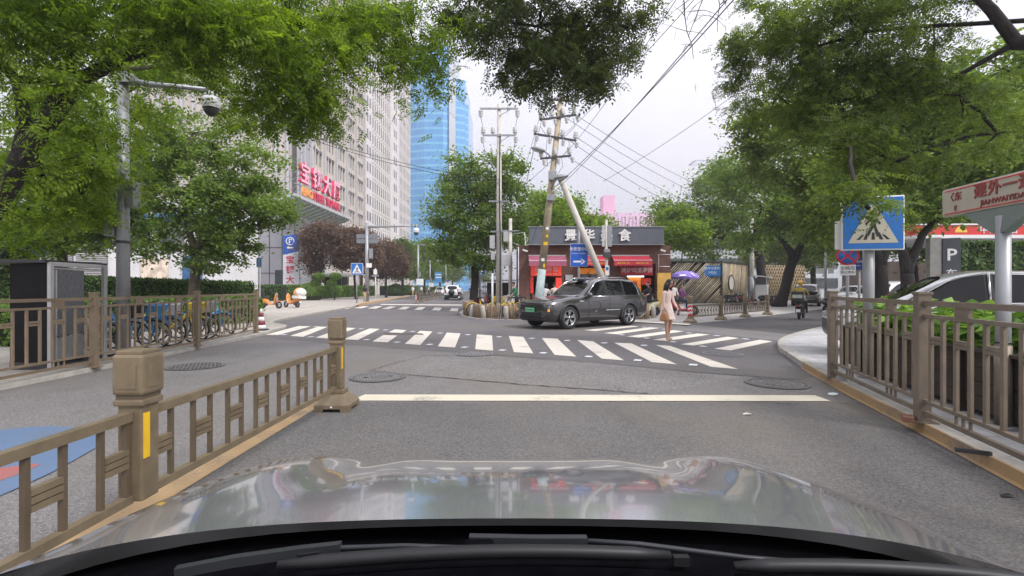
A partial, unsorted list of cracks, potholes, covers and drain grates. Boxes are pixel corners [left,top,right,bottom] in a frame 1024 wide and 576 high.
manhole cover [164,362,226,371]
manhole cover [744,378,812,389]
manhole cover [349,372,406,382]
